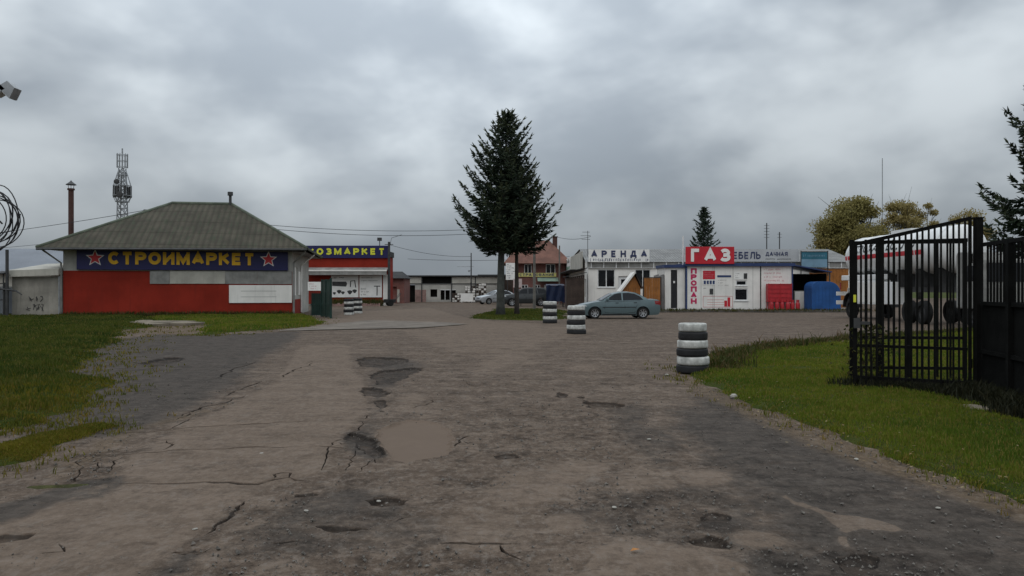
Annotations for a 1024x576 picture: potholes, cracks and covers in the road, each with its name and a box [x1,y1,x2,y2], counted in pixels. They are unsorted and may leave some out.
pothole [365,496,408,507]
pothole [358,387,391,398]
pothole [832,552,880,576]
pothole [343,432,386,457]
pothole [373,399,389,413]
pothole [368,367,424,385]
pothole [684,535,733,549]
pothole [315,525,376,534]
pothole [354,357,409,368]
pothole [699,512,732,522]
pothole [375,420,456,463]
crack [27,362,390,555]
